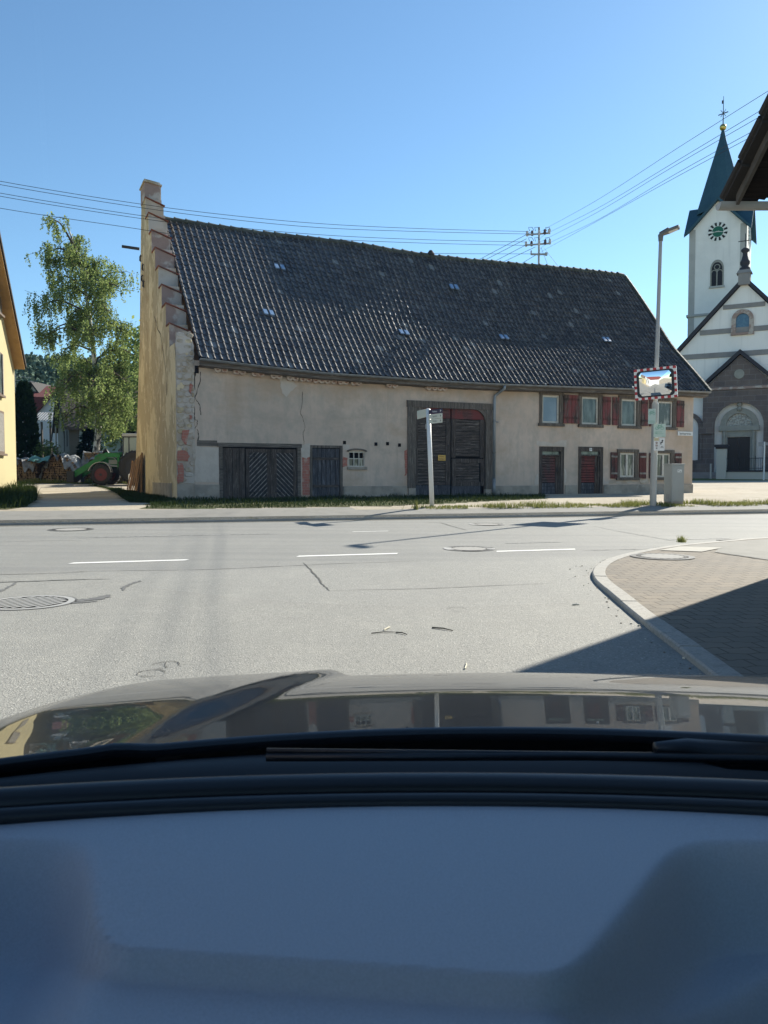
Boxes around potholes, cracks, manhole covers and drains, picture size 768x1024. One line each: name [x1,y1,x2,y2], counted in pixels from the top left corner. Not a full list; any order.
manhole cover [0,595,78,610]
crack [63,580,141,603]
crack [304,563,544,591]
